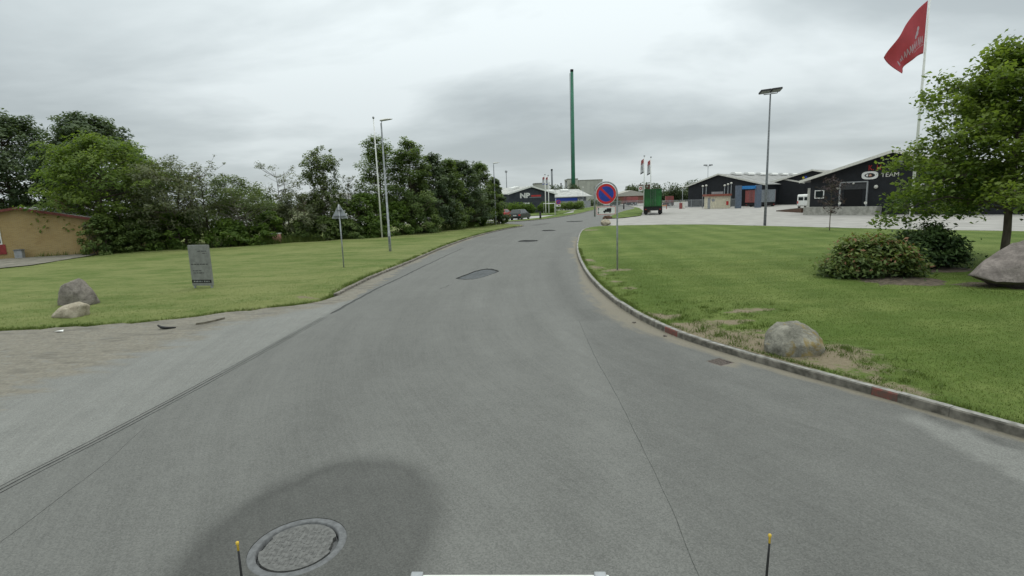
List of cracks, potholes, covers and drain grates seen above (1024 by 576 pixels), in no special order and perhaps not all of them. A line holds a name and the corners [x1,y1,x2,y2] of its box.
manhole cover [246,518,347,576]
drain grate [707,358,733,366]
